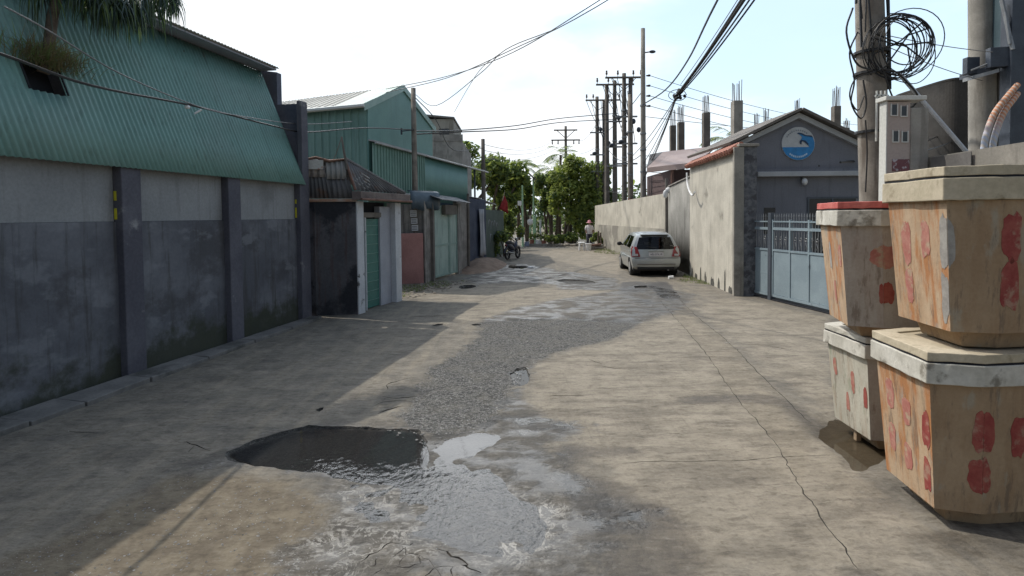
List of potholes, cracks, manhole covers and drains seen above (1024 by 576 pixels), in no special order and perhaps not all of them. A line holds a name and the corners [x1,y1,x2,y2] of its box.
crack [362,542,481,576]
pothole [510,367,530,386]
pothole [225,425,430,467]
